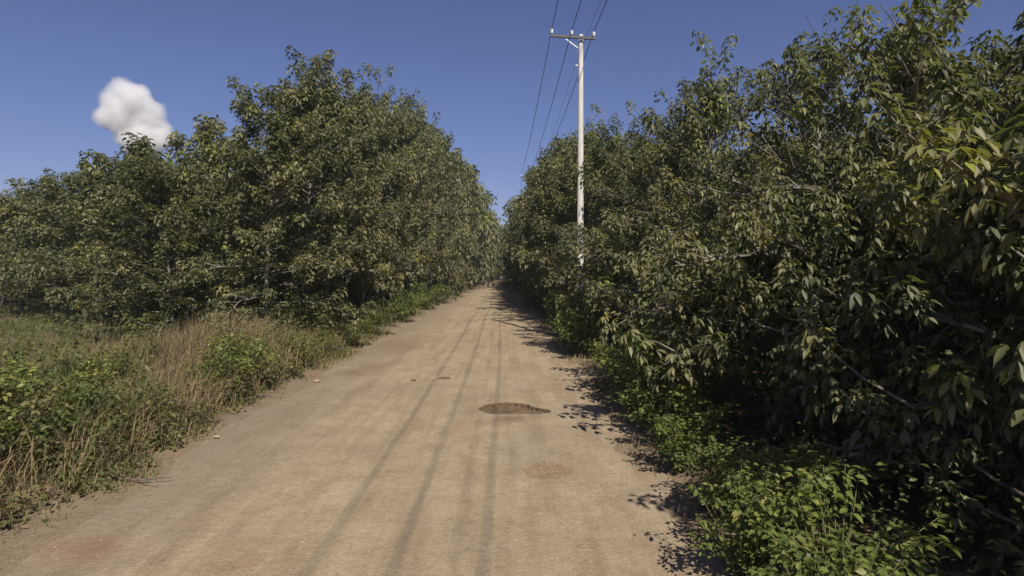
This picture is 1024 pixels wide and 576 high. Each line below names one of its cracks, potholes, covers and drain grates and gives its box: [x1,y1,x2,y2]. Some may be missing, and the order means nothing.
pothole [477,402,551,414]
